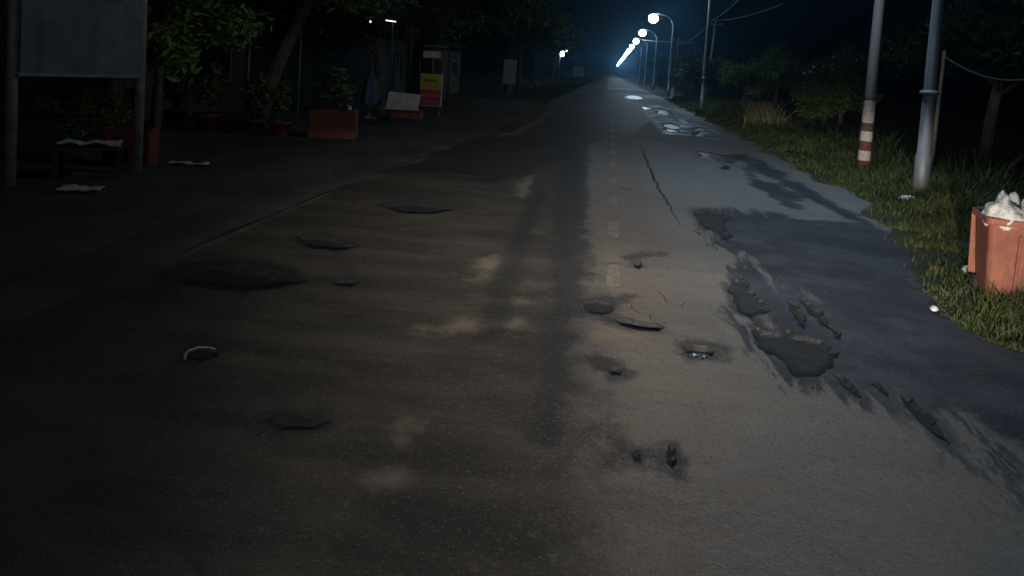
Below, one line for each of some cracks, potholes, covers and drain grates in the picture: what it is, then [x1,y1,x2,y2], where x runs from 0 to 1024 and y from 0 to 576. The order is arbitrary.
pothole [631,450,641,463]
pothole [751,324,840,378]
pothole [607,365,623,376]
pothole [614,318,666,332]
pothole [681,344,717,360]
pothole [666,444,677,469]
pothole [691,127,716,137]
pothole [660,122,683,133]
pothole [157,260,310,292]
pothole [293,233,357,251]
crack [617,137,706,235]
crack [631,291,687,321]
